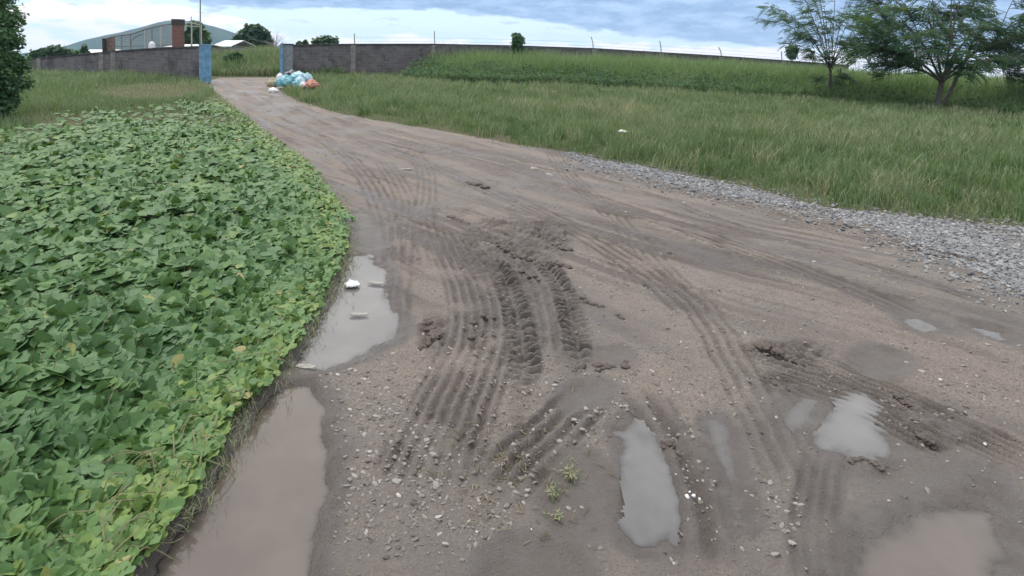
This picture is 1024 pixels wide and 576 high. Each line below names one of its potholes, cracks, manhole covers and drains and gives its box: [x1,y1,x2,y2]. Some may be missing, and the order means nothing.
pothole [891,309,956,333]
pothole [808,386,900,462]
pothole [280,250,413,373]
pothole [133,373,346,576]
pothole [813,492,1024,576]
pothole [774,388,834,434]
pothole [611,412,687,555]
